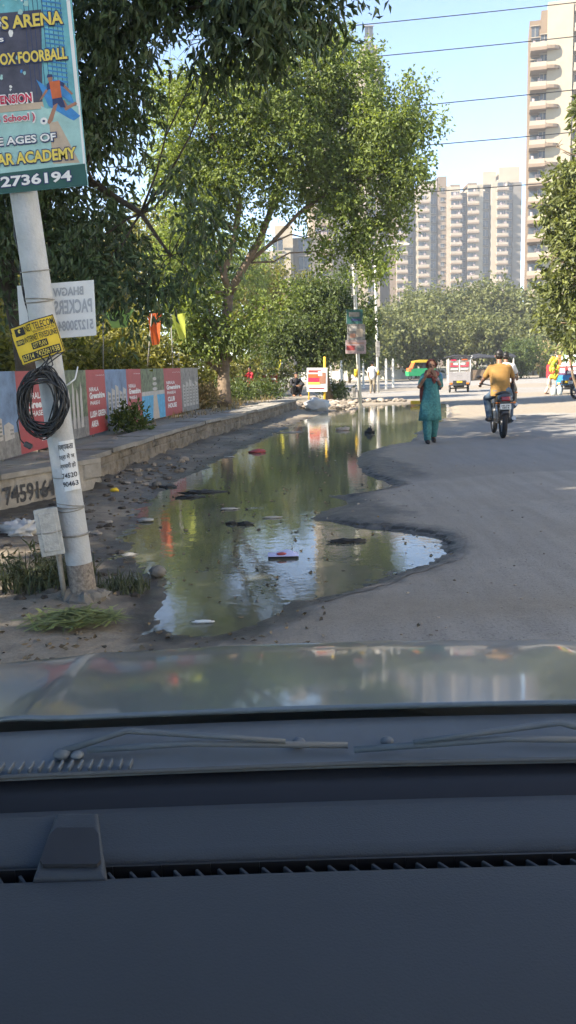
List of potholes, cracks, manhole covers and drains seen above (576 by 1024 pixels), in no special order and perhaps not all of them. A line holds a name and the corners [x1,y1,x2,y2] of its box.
pothole [337,465,407,497]
pothole [292,516,466,602]
